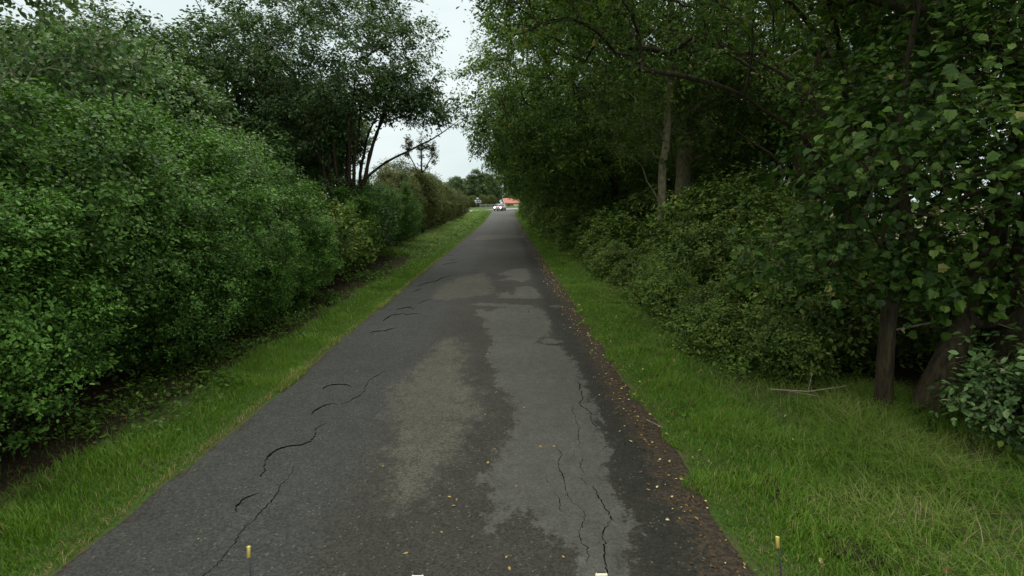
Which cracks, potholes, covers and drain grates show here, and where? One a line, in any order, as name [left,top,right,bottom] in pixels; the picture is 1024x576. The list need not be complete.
crack [203,369,390,576]
crack [545,377,614,574]
crack [371,246,464,333]
